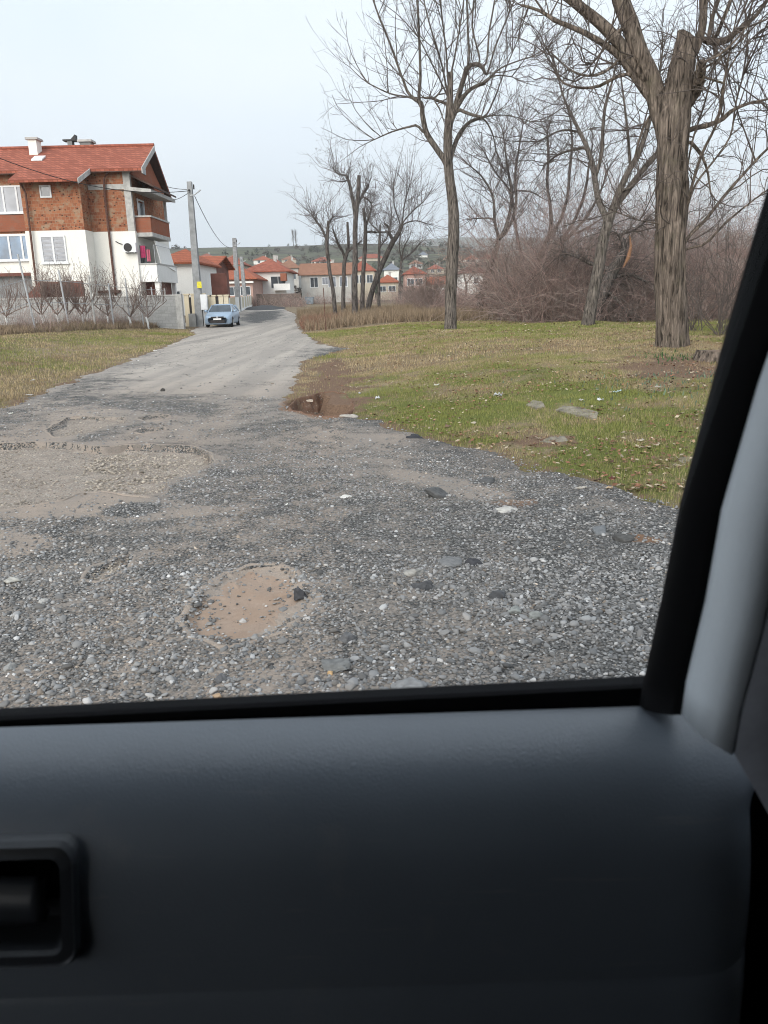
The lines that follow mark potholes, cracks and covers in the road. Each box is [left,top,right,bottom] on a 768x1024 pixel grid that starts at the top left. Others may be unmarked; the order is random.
pothole [174,562,323,649]
pothole [0,441,218,511]
pothole [43,416,131,438]
pothole [135,413,171,422]
pothole [288,391,355,418]
pothole [79,552,137,583]
pothole [130,426,168,434]
